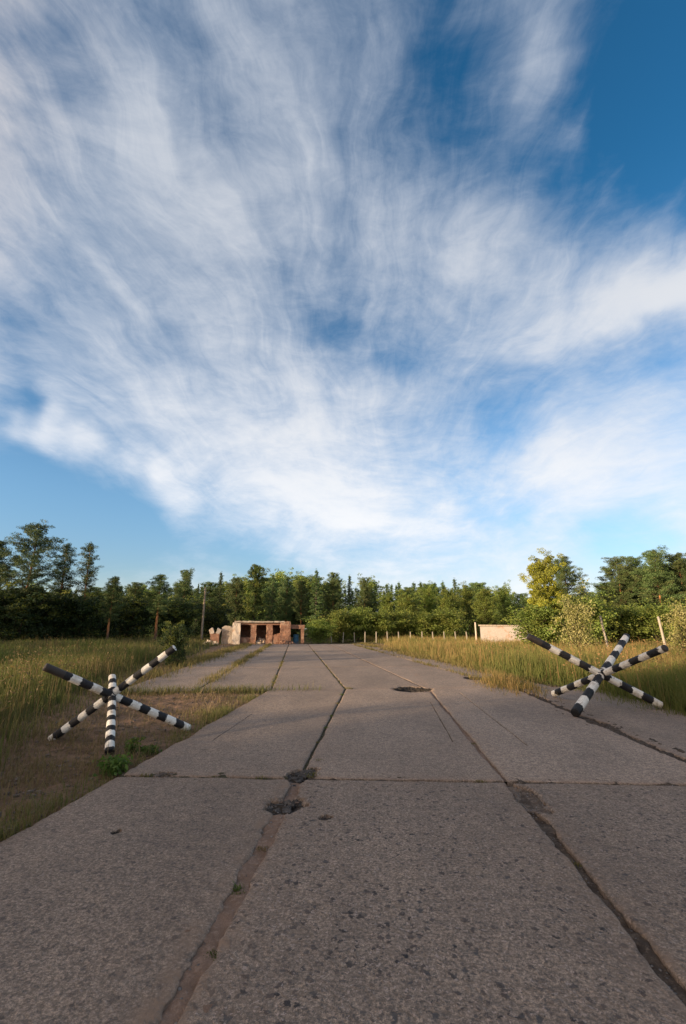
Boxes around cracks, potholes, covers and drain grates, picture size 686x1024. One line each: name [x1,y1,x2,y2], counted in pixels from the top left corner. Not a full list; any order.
pothole [286,769,316,787]
pothole [267,799,304,815]
